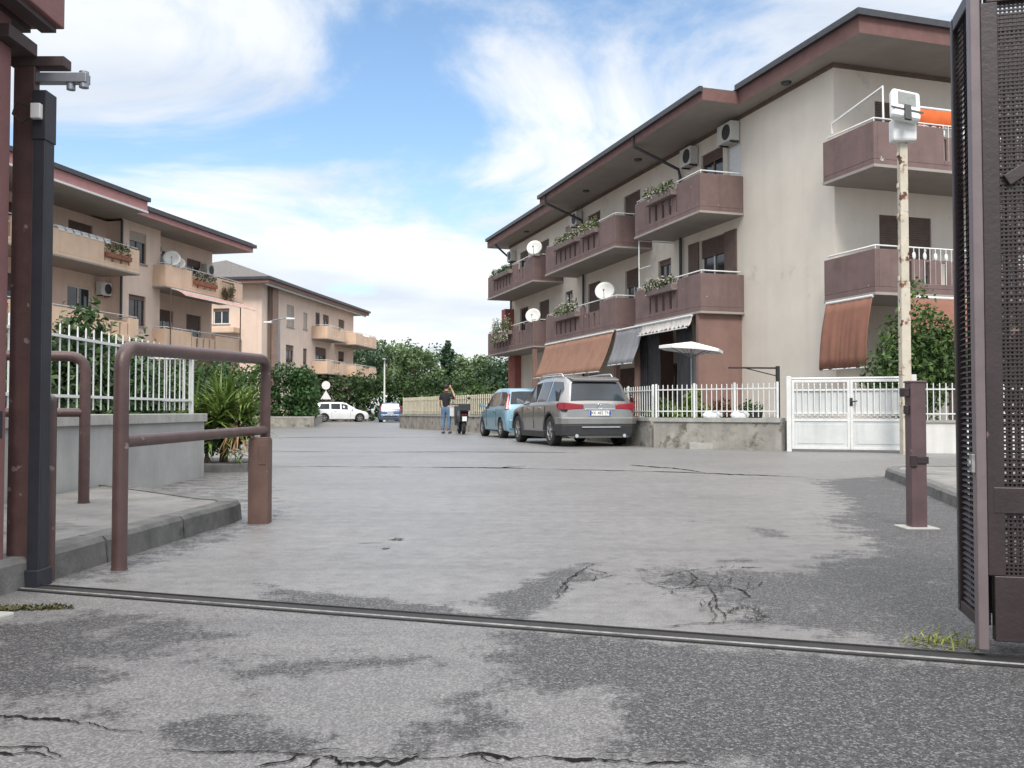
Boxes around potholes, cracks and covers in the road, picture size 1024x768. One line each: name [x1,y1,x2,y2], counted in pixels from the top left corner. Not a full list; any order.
crack [555,563,617,598]
crack [165,748,711,768]
crack [641,566,767,626]
